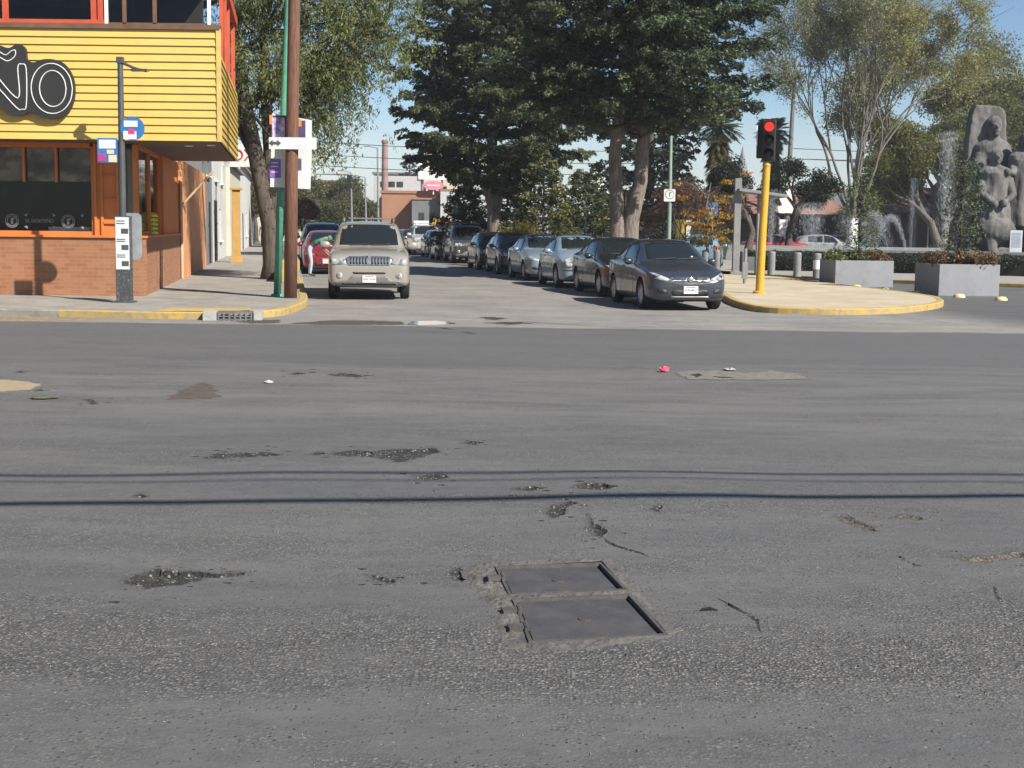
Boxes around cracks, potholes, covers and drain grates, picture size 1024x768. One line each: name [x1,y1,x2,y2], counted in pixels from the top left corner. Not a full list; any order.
drain grate [203,310,263,321]
pothole [535,499,590,521]
pothole [570,477,620,493]
pothole [323,446,460,462]
manhole cover [486,562,628,595]
crack [993,586,1003,602]
pothole [355,568,428,586]
pothole [508,484,554,496]
crack [604,538,647,556]
pothole [190,448,291,462]
crack [717,598,761,632]
pothole [108,566,256,603]
